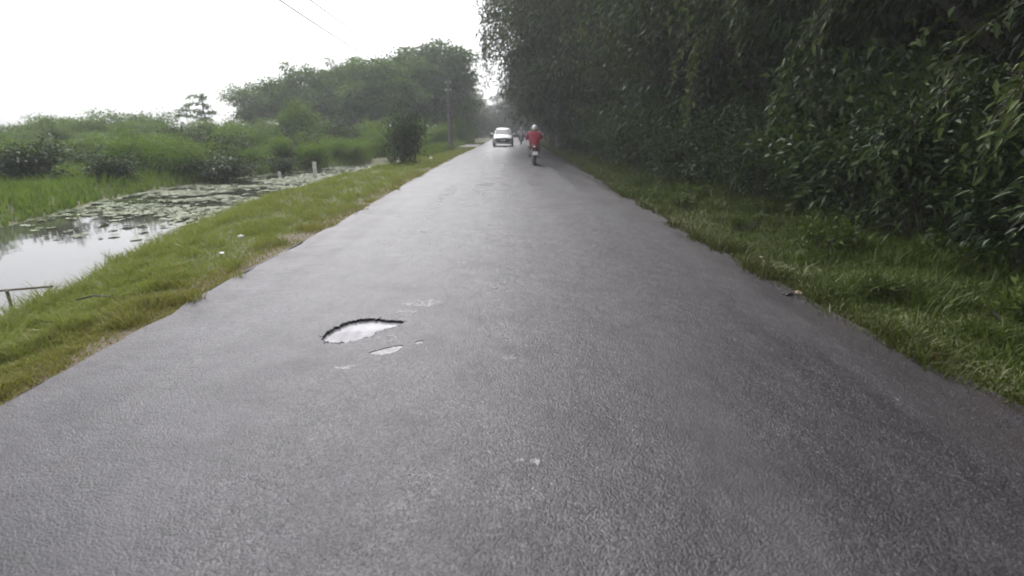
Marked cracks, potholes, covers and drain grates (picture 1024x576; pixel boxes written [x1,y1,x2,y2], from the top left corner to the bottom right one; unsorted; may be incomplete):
pothole [319,317,407,344]
pothole [370,345,403,355]
